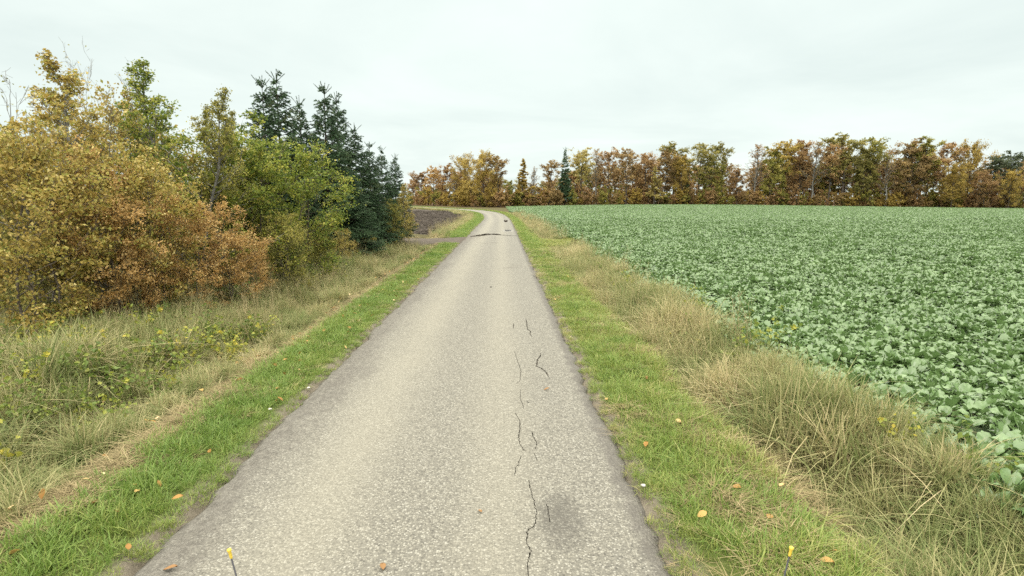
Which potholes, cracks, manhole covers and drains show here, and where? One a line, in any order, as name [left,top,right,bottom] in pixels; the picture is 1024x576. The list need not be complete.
crack [514,353,550,576]
